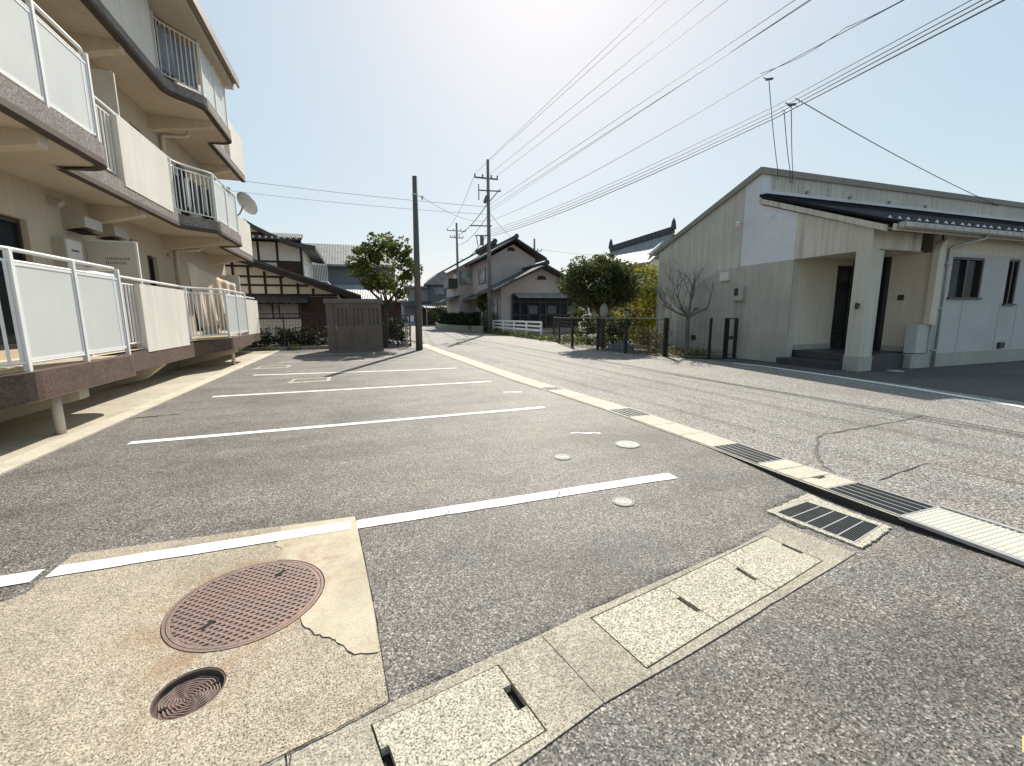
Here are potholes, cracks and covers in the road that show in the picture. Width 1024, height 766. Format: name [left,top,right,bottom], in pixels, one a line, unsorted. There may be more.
drain grate [825,482,938,516]
drain grate [711,443,785,464]
manhole cover [150,668,226,720]
crack [814,407,1022,474]
manhole cover [161,560,324,653]
crack [878,463,1021,484]
drain grate [767,493,891,549]
drain grate [607,408,651,417]
